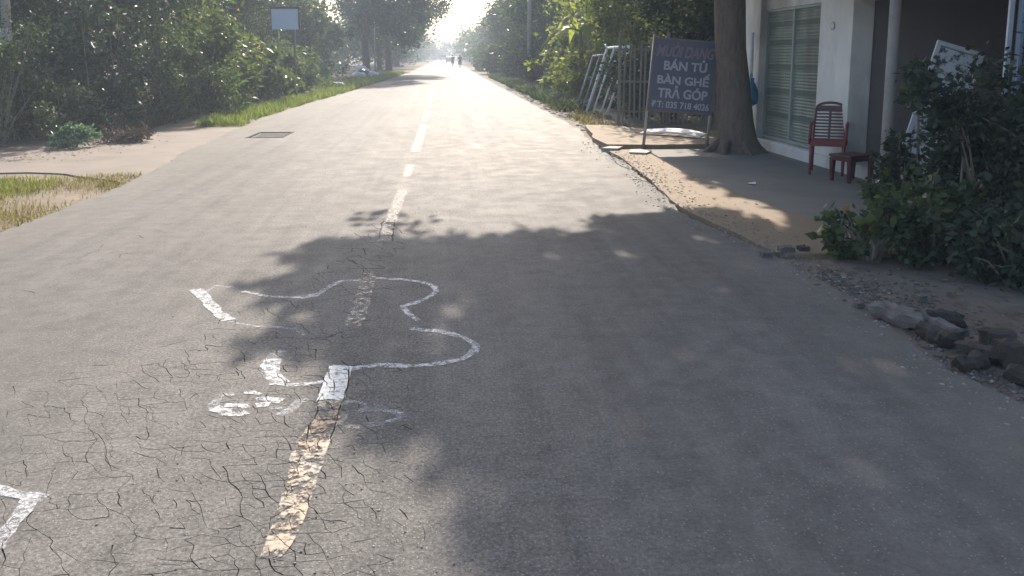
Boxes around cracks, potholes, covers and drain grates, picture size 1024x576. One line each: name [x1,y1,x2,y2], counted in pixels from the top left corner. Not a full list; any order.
crack [0,220,432,576]
